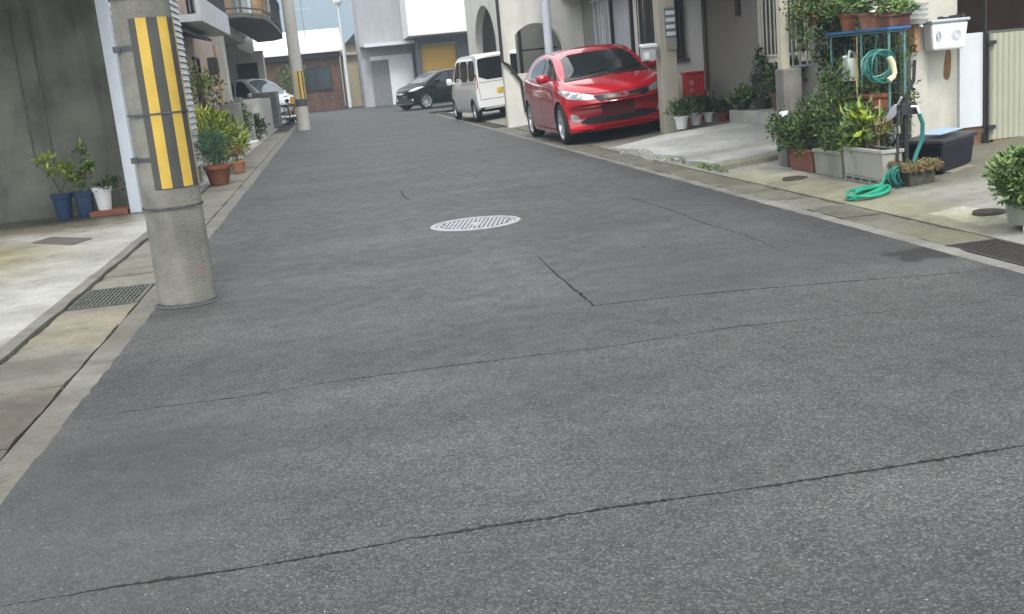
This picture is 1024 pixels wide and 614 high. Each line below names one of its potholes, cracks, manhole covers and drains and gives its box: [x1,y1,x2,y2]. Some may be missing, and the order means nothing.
manhole cover [972,208,1006,216]
drain grate [67,283,155,311]
manhole cover [430,215,521,231]
crack [84,298,1019,419]
crack [4,445,1021,606]
drain grate [946,239,1024,266]
